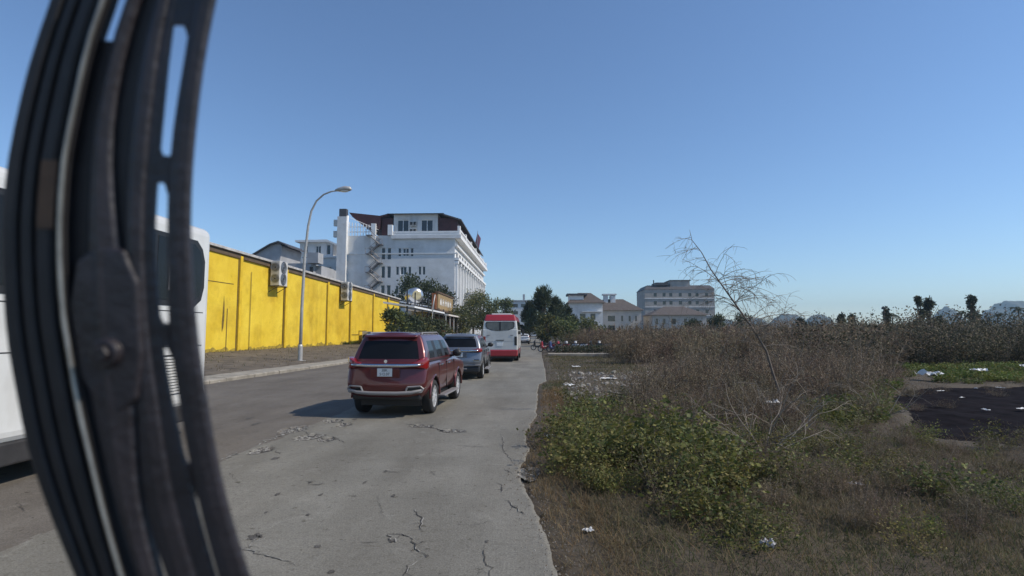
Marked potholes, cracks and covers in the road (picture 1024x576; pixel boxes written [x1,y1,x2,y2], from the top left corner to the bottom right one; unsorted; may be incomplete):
pothole [248,446,274,455]
crack [455,435,523,525]
crack [364,492,453,576]
pothole [292,433,325,441]
pothole [277,425,308,434]
crack [241,534,296,565]
